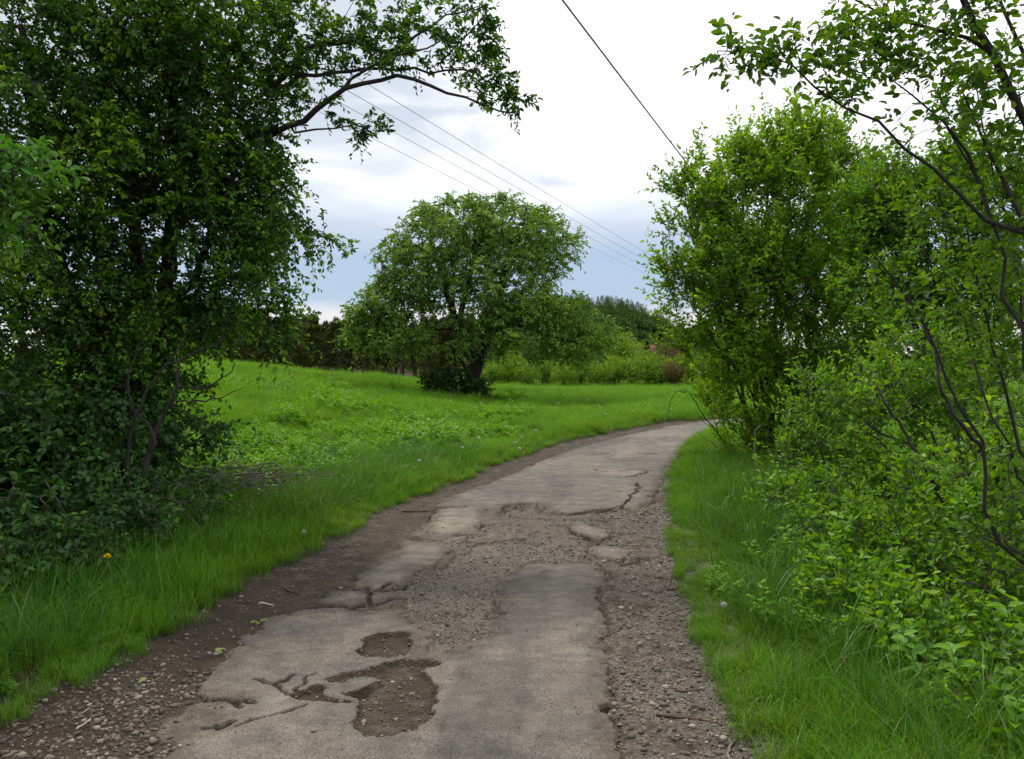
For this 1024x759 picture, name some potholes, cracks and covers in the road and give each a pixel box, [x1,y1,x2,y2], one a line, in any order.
pothole [350,629,420,660]
pothole [616,555,653,568]
crack [195,671,318,732]
pothole [490,504,549,519]
crack [308,580,418,611]
pothole [318,655,452,741]
crack [551,453,660,547]
